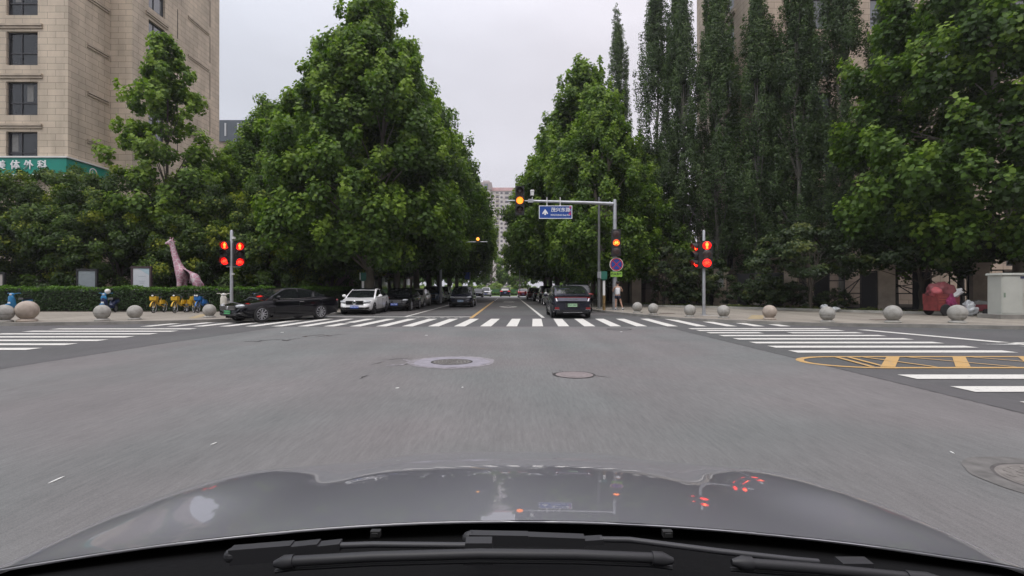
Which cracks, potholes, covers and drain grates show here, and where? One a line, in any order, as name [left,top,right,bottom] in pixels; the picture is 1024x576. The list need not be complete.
manhole cover [961,456,1024,493]
manhole cover [386,356,494,369]
